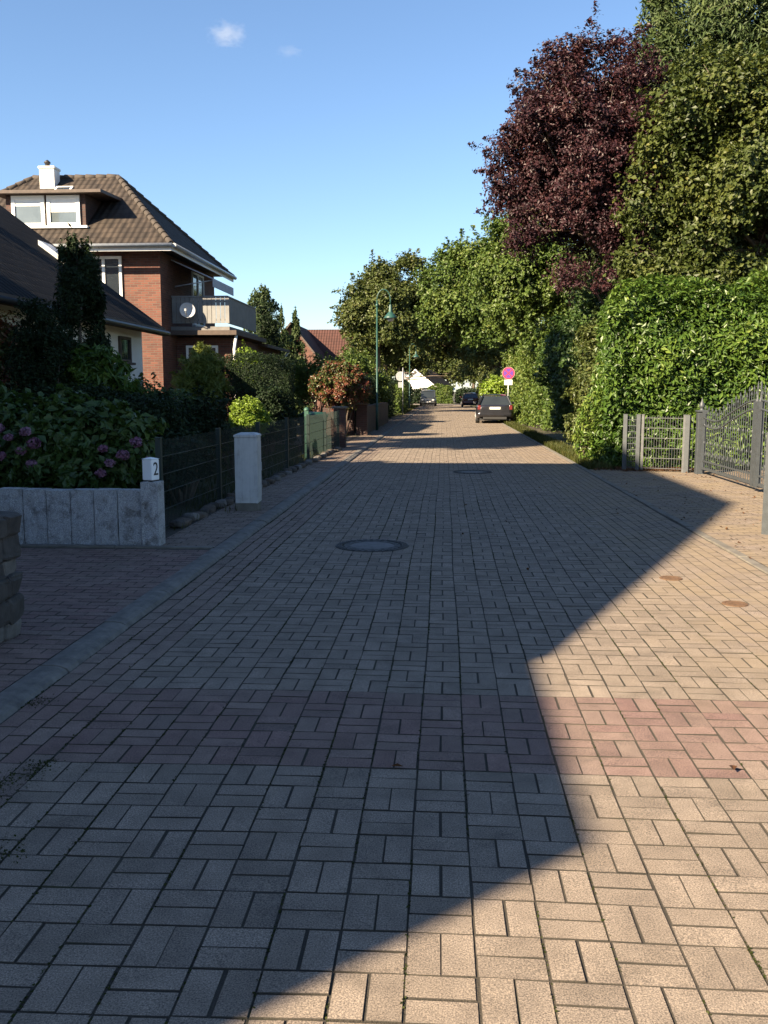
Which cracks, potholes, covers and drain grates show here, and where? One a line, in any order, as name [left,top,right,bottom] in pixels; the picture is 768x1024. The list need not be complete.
manhole cover [336,539,409,552]
utility cover [722,600,749,608]
